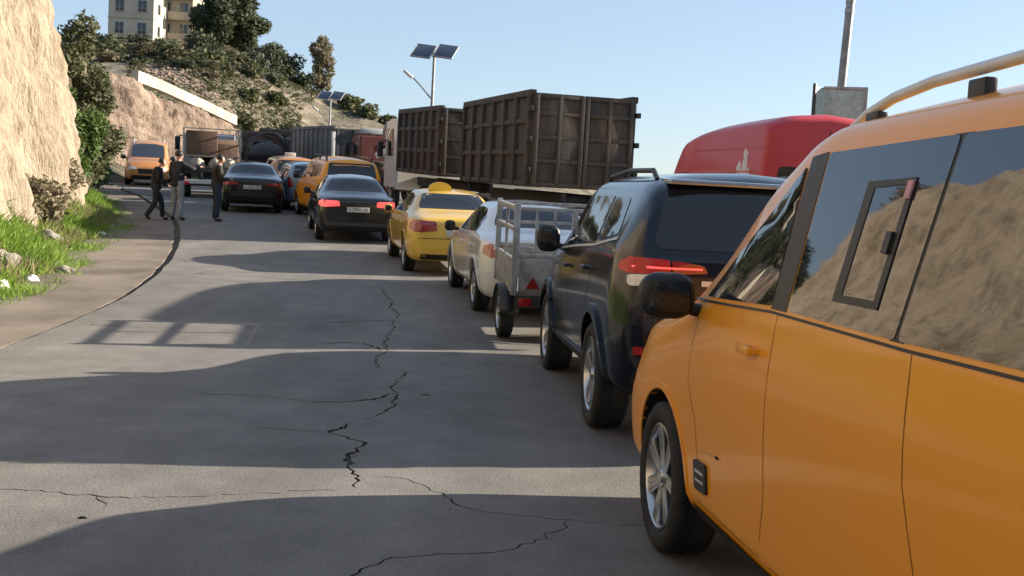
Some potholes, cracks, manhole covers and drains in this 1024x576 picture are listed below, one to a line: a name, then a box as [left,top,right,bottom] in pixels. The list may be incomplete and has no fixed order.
crack [290,426,368,487]
crack [351,477,591,576]
crack [10,489,313,507]
crack [203,372,427,417]
